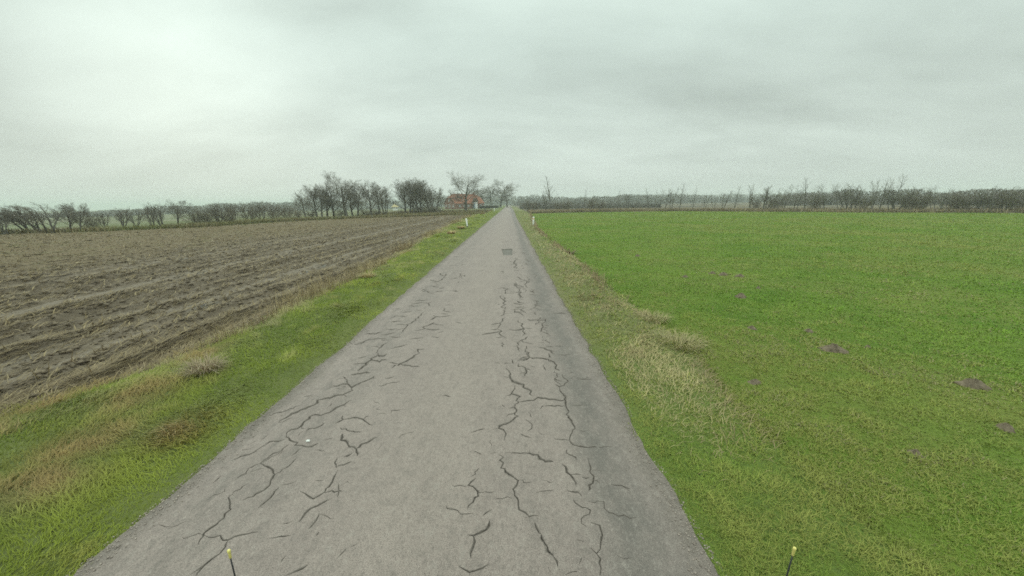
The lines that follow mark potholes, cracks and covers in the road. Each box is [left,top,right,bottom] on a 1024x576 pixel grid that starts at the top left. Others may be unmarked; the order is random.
crack [446,248,636,576]
crack [161,253,465,576]
